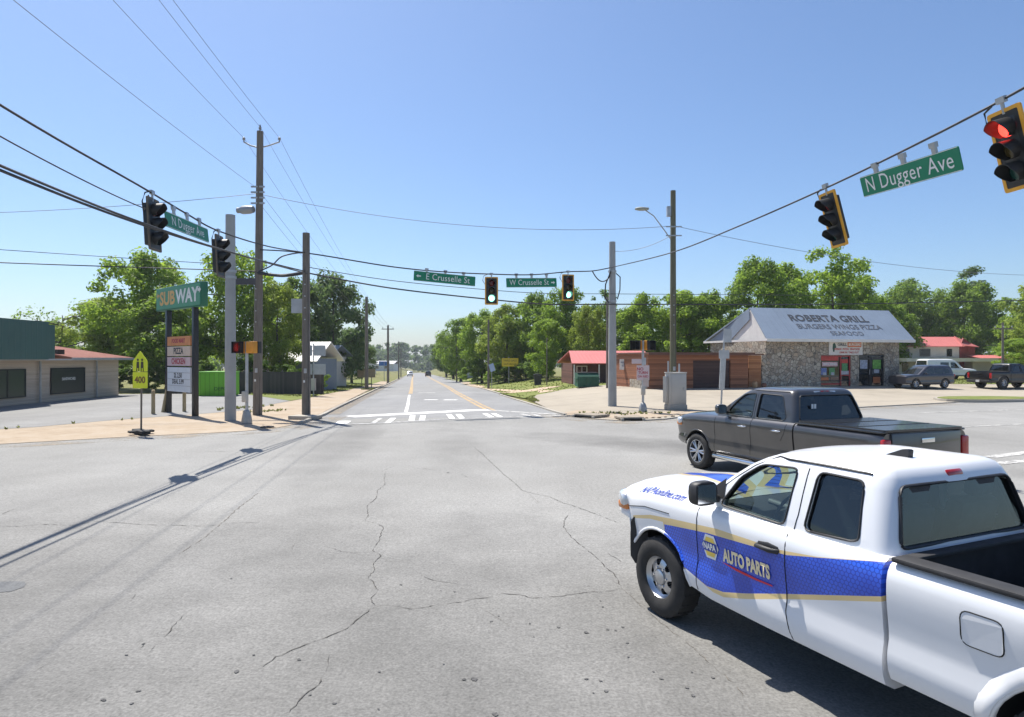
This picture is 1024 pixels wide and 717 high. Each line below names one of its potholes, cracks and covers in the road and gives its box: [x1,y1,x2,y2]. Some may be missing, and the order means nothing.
crack [380,447,627,625]
crack [258,481,385,669]
